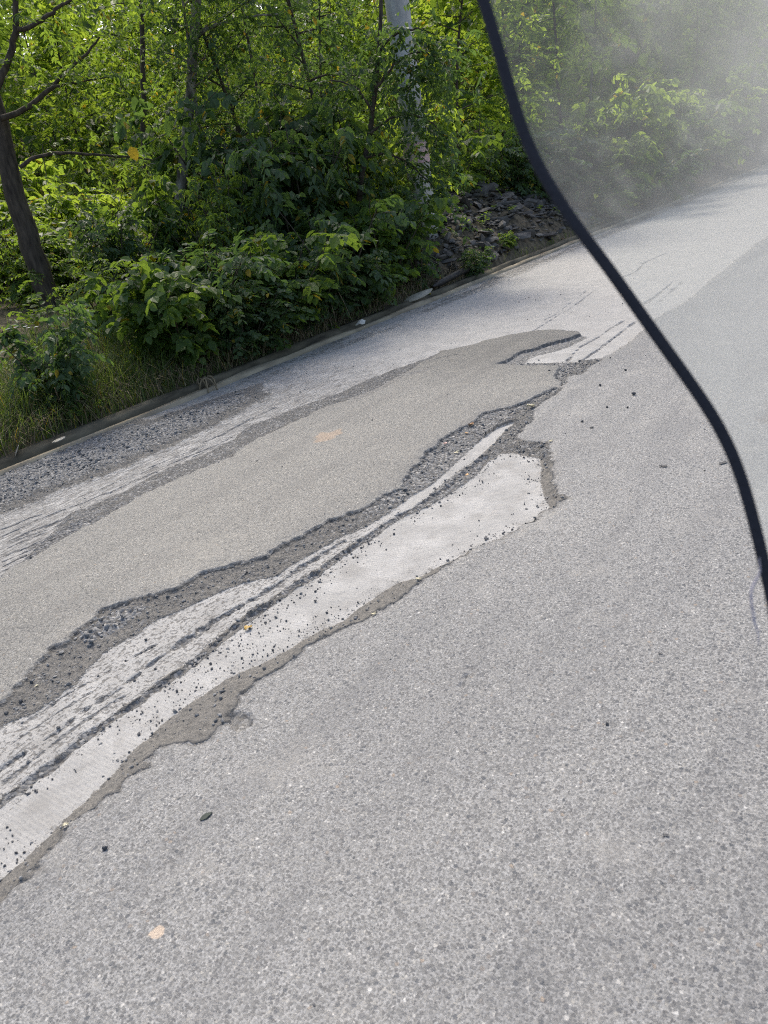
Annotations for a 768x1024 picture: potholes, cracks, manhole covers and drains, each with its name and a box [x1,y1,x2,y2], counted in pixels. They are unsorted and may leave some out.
crack [532,287,599,331]
pothole [0,357,605,906]
crack [622,252,684,304]
